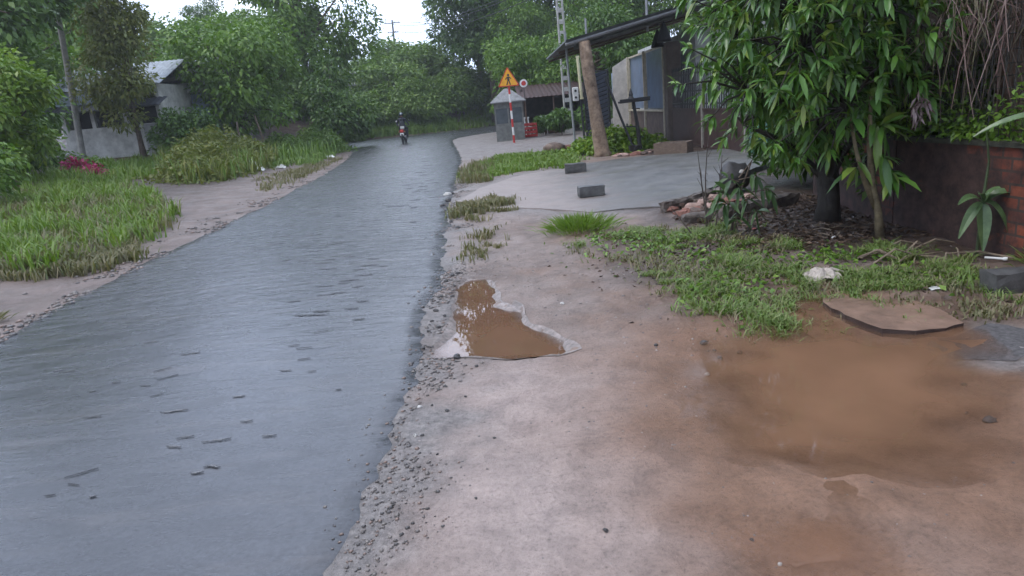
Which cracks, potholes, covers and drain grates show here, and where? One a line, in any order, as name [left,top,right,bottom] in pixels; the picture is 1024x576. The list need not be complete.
pothole [431,279,582,360]
